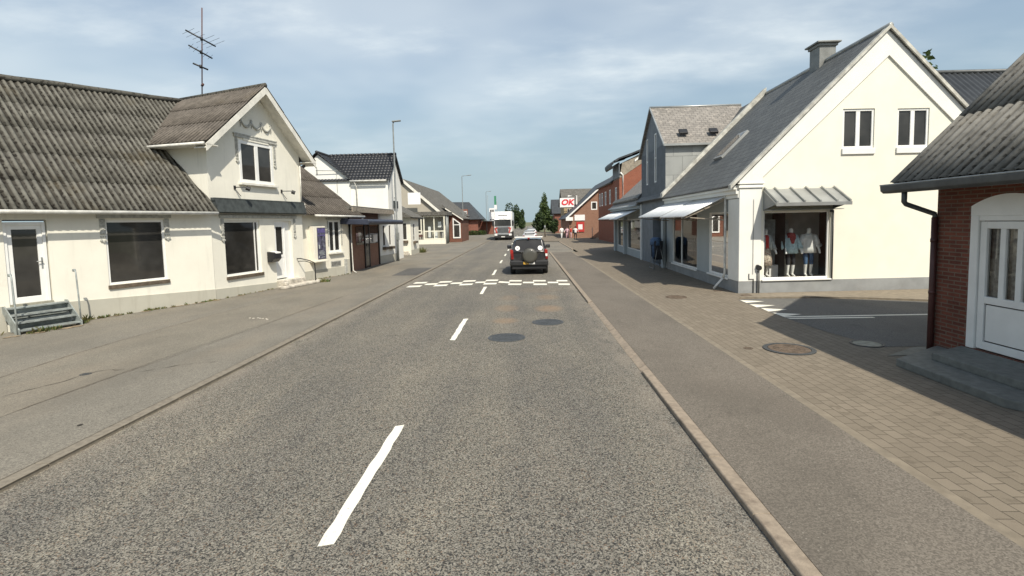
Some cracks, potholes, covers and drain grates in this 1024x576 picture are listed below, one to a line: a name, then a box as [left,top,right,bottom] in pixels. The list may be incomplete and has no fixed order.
manhole cover [763,343,817,356]
manhole cover [488,333,525,342]
manhole cover [849,340,885,348]
